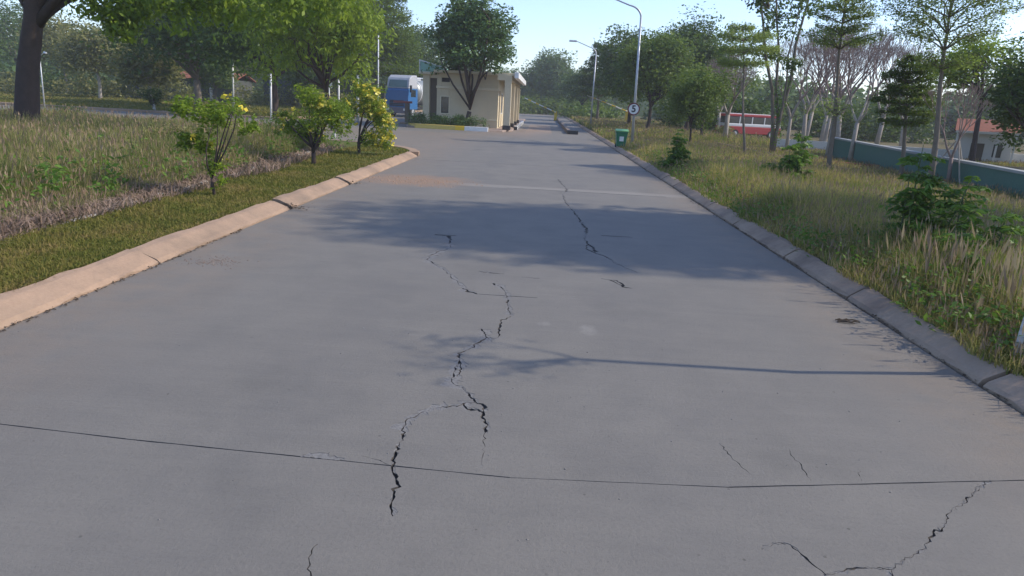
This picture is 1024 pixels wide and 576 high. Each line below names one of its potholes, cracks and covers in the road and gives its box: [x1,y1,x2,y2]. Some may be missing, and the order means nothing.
crack [761,480,991,576]
crack [365,235,529,516]
crack [557,179,633,288]
